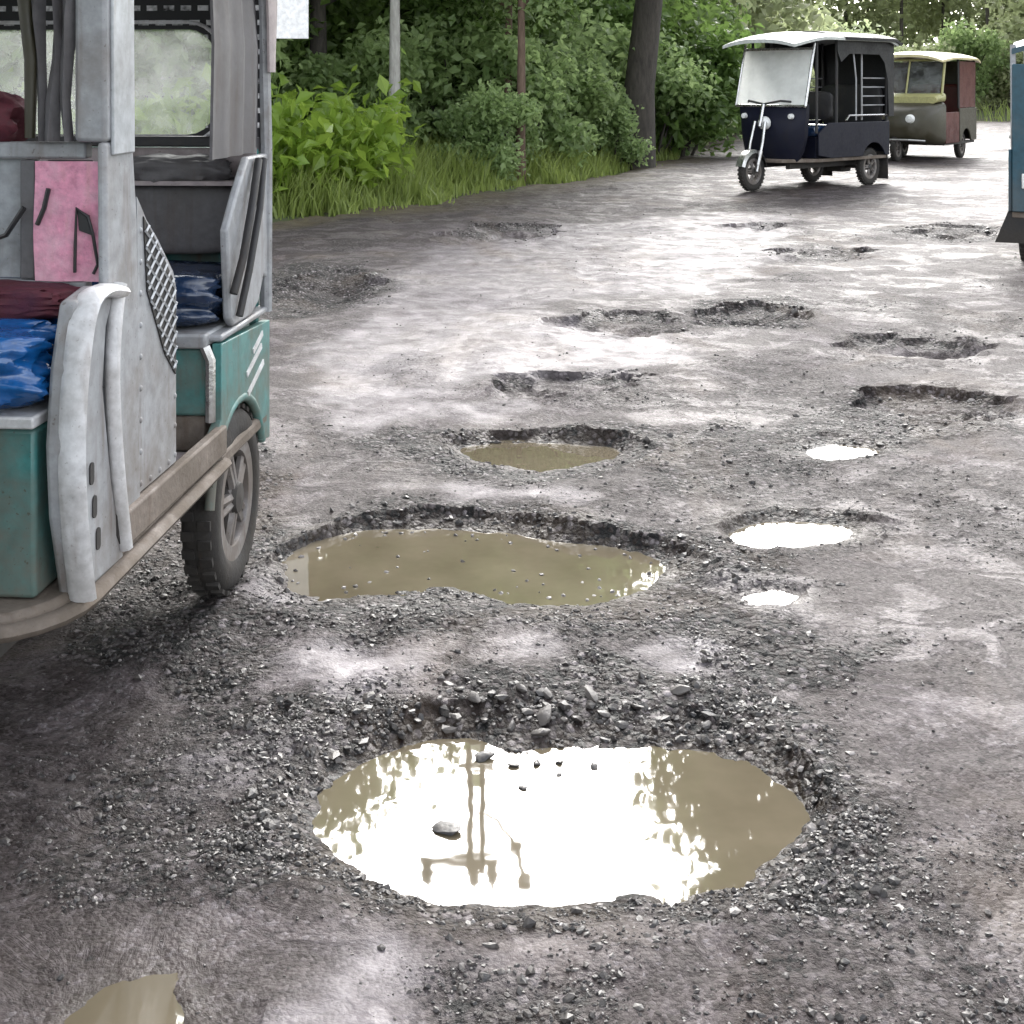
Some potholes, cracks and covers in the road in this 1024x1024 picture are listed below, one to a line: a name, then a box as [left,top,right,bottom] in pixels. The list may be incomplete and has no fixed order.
pothole [438,424,662,484]
pothole [764,247,878,264]
pothole [664,300,815,329]
pothole [414,221,565,250]
pothole [250,690,845,954]
pothole [884,223,1001,240]
pothole [783,430,891,462]
pothole [711,221,788,232]
pothole [728,578,810,613]
pothole [484,369,655,401]
pothole [831,333,1004,367]
pothole [845,384,1024,422]
